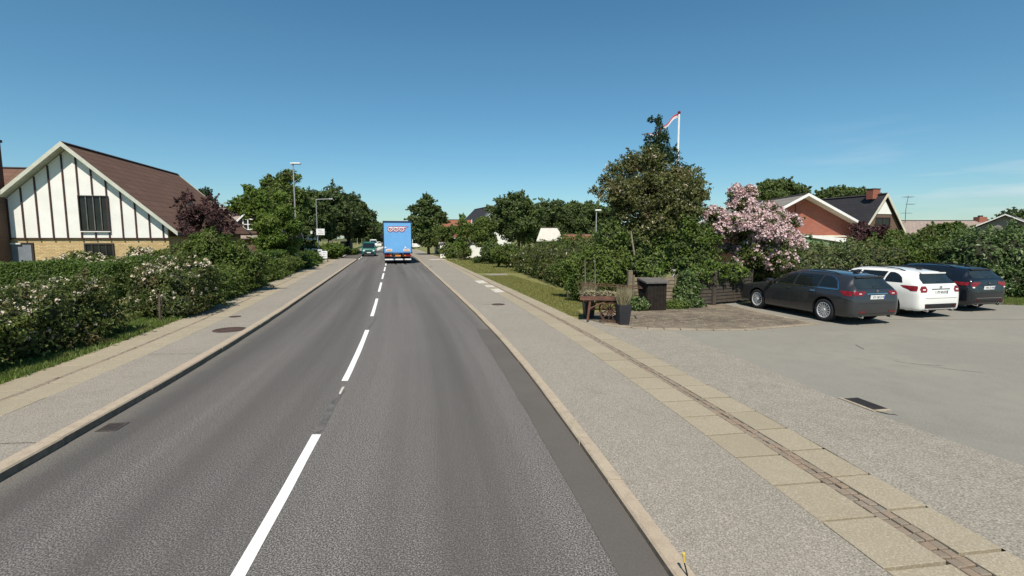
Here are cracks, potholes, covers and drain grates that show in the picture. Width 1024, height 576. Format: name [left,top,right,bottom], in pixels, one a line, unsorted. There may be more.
drain grate [94,422,130,432]
drain grate [838,397,891,412]
